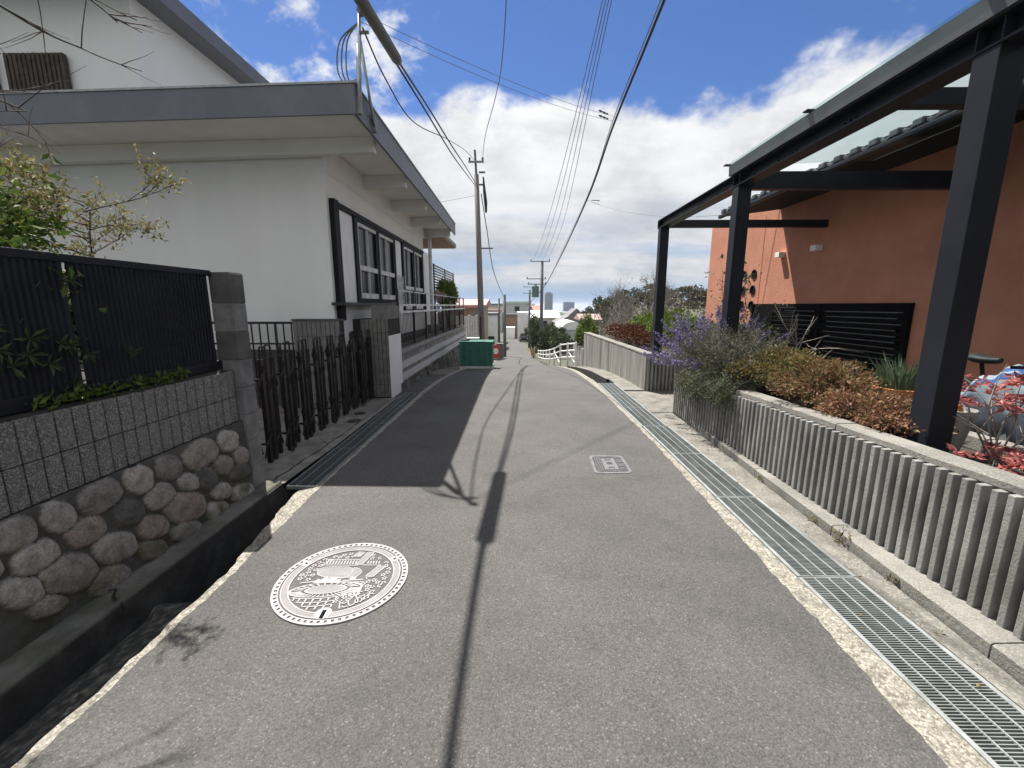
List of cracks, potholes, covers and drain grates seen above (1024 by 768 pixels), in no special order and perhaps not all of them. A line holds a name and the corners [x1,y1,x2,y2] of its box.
drain grate [367,405,406,423]
drain grate [390,392,420,406]
manhole cover [590,455,632,474]
manhole cover [270,543,408,626]
drain grate [336,423,387,448]
drain grate [286,448,359,489]
